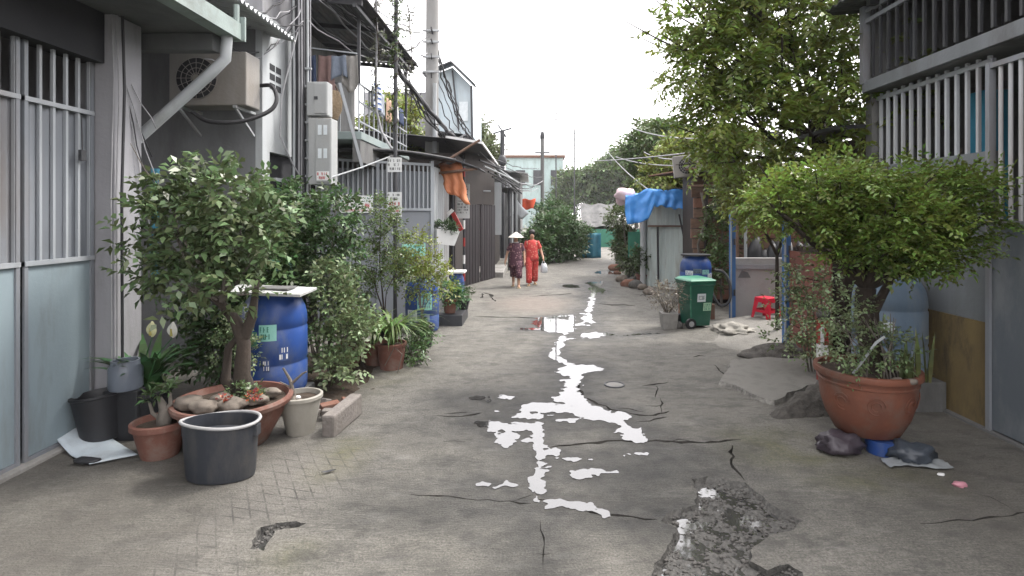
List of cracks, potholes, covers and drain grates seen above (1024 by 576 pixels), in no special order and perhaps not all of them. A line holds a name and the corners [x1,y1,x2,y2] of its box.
crack [920,492,1024,524]
crack [552,425,744,479]
pothole [652,476,803,576]
pothole [251,521,306,551]
crack [540,522,552,562]
crack [578,382,669,422]
